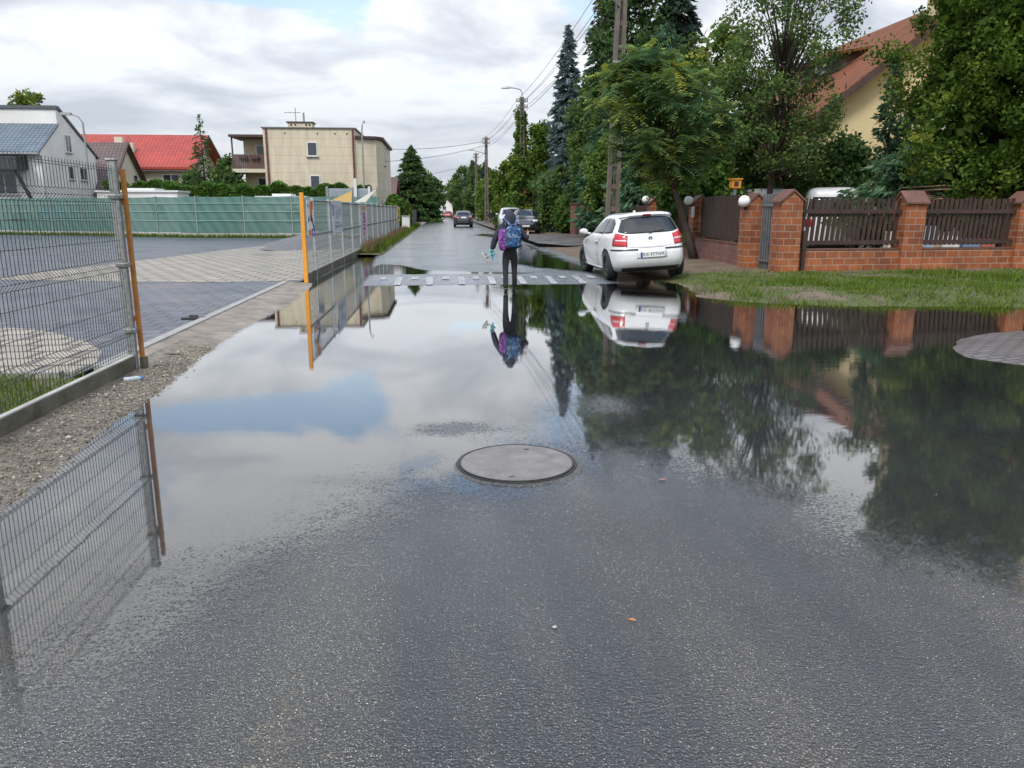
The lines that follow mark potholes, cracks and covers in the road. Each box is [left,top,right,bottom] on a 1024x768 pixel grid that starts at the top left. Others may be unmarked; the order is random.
manhole cover [453,444,587,488]
